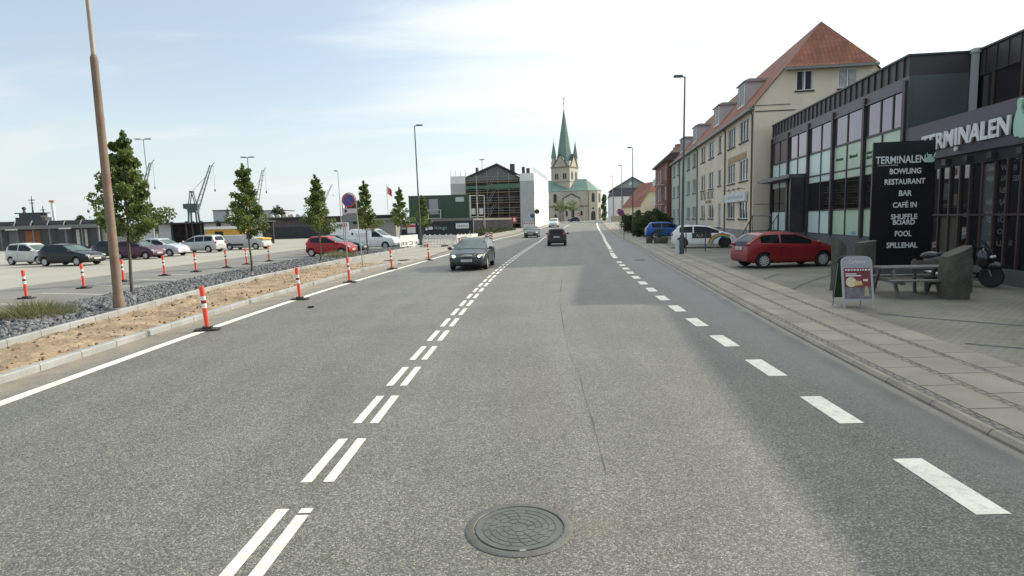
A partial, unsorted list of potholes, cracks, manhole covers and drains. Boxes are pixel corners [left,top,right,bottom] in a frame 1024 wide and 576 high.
manhole cover [465,503,573,558]
